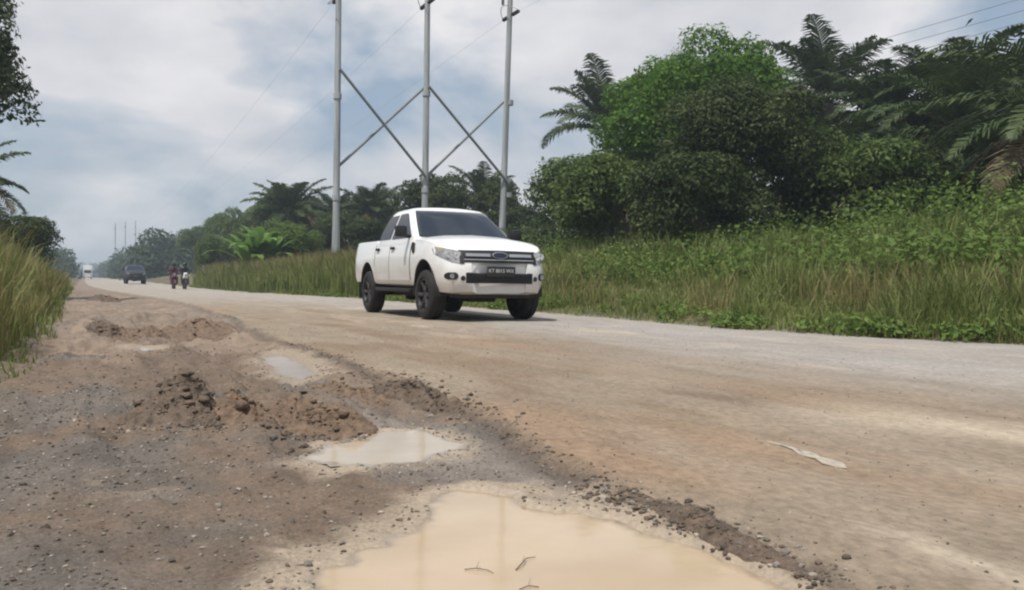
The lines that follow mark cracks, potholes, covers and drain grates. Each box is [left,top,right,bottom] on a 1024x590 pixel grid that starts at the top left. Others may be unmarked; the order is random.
pothole [290,483,816,590]
pothole [254,349,333,383]
pothole [298,427,471,469]
